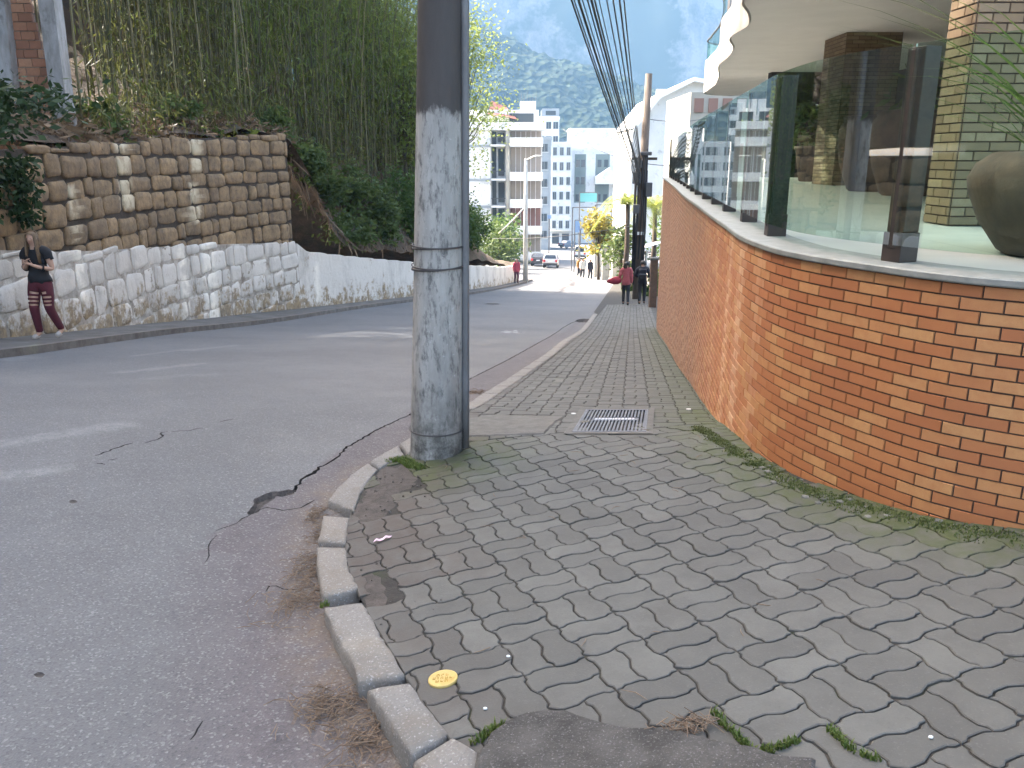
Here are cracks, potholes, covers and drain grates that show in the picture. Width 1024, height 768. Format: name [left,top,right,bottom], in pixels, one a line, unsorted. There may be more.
crack [206,321,576,561]
drain grate [563,408,655,434]
crack [95,428,199,465]
